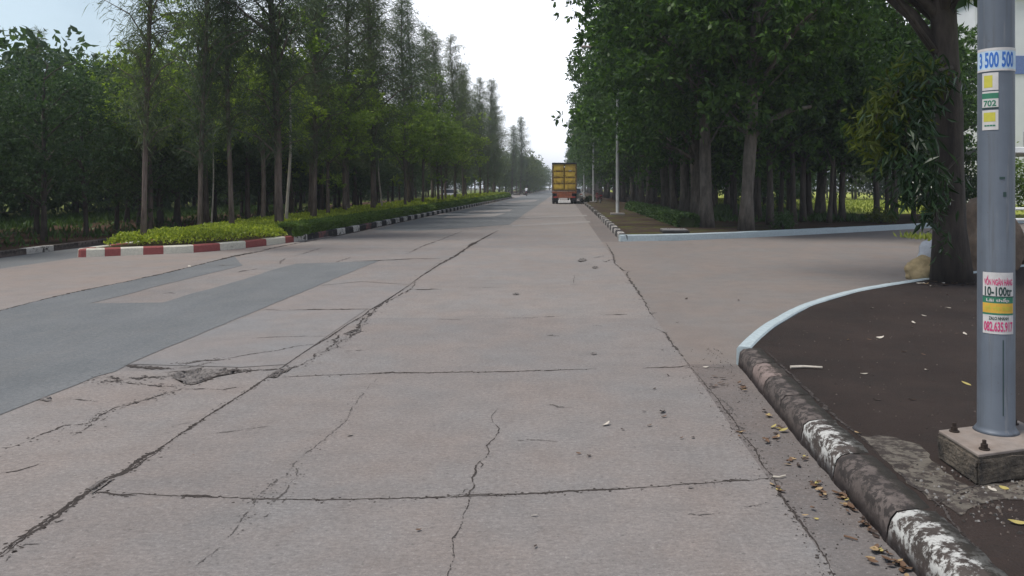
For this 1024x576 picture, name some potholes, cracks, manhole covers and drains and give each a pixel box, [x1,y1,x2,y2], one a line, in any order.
crack [3,281,415,449]
pothole [172,367,245,385]
crack [447,412,499,576]
crack [198,381,378,564]
